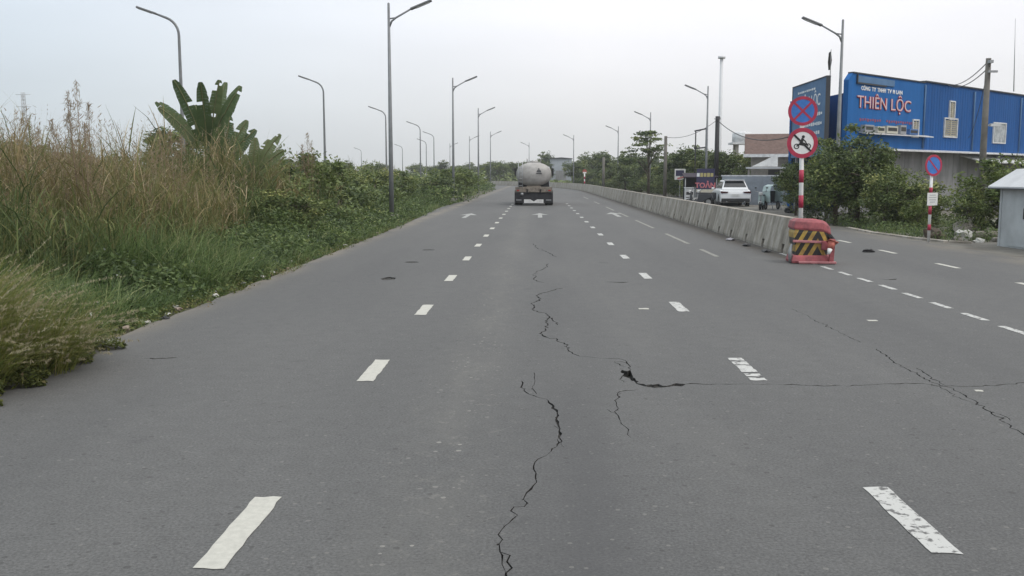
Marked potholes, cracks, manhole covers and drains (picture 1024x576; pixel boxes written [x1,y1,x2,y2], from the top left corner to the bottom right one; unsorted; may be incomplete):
crack [531,244,1024,436]
crack [496,373,564,576]
